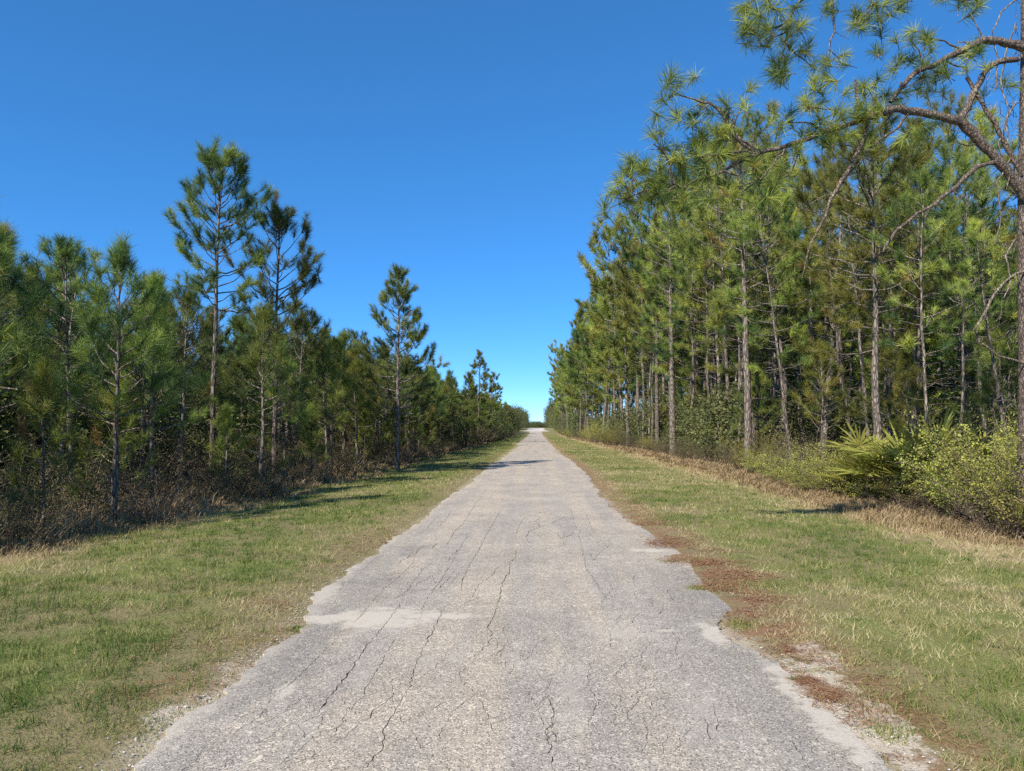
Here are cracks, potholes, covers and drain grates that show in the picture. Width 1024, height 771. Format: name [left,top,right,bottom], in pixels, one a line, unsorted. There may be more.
crack [260,496,719,771]
